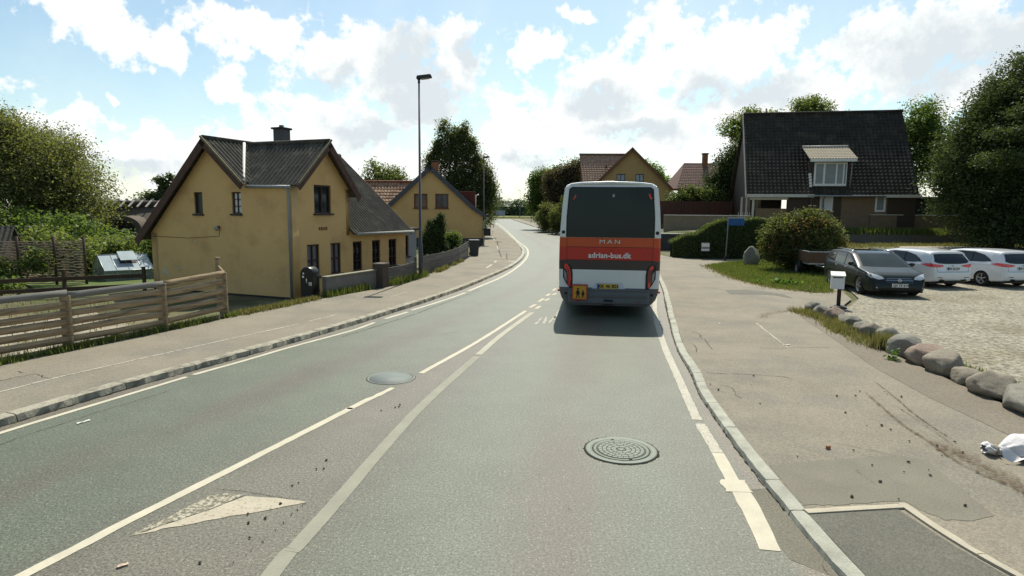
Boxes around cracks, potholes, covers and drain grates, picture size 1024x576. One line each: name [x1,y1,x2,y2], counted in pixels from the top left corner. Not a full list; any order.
manhole cover [583,437,660,465]
manhole cover [366,372,416,385]
